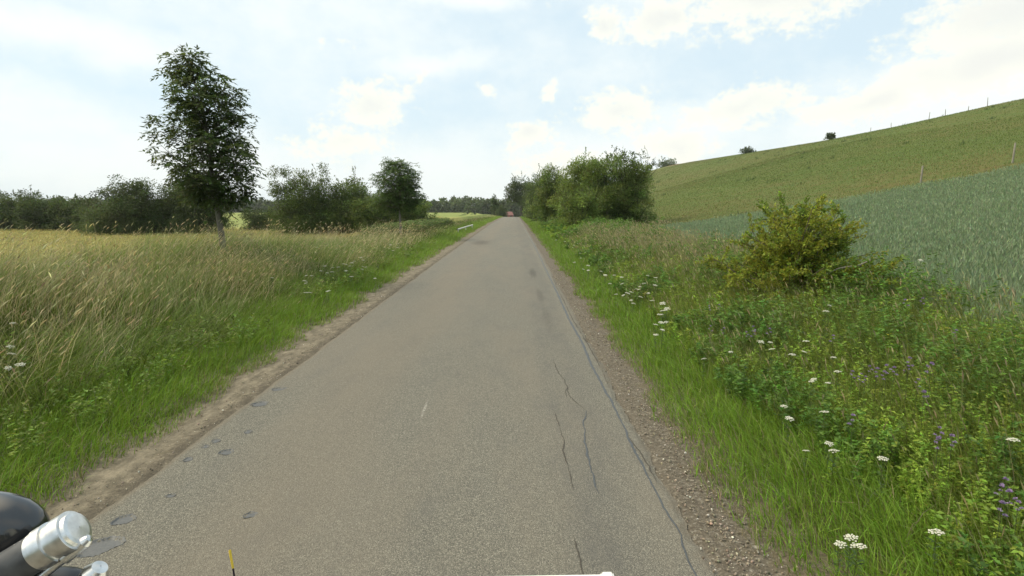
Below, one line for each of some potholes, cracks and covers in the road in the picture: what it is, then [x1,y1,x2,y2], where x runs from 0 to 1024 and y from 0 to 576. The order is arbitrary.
crack [553,360,598,492]
crack [574,537,584,575]
